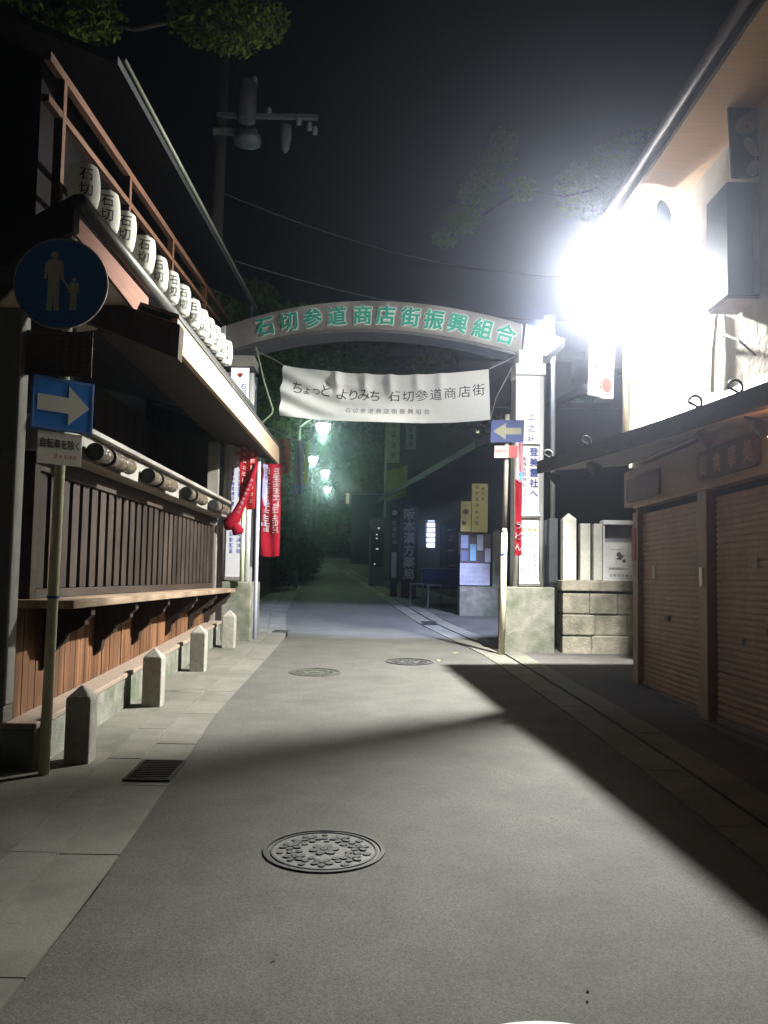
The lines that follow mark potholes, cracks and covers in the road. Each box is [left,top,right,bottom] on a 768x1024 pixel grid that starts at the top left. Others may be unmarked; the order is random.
manhole cover [289,667,341,677]
drain grate [122,759,187,782]
manhole cover [263,828,385,874]
